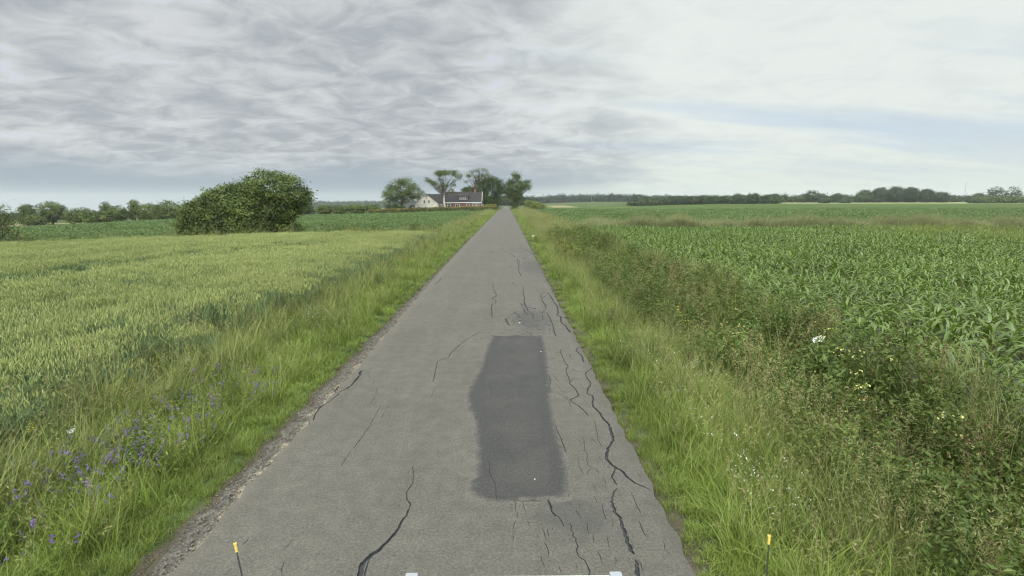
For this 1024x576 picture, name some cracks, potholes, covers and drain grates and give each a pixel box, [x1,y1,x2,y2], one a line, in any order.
crack [357,465,414,576]
crack [313,370,384,466]
crack [431,248,671,576]
